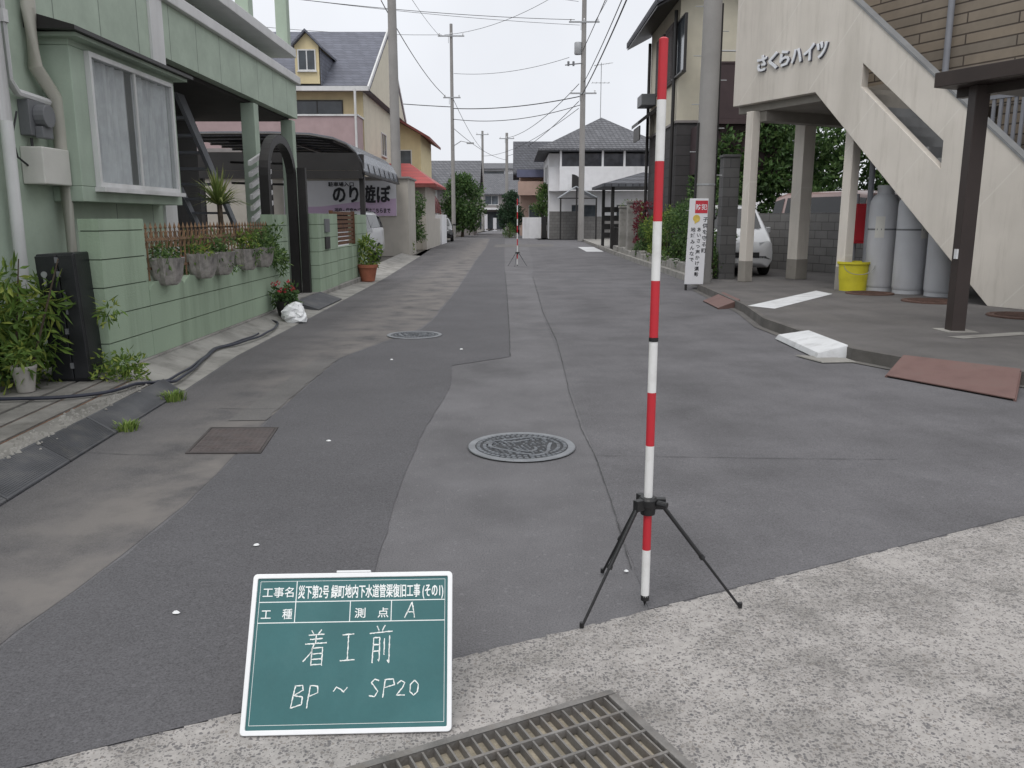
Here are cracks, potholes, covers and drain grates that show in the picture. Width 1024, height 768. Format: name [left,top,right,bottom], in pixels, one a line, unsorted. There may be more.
drain grate [345,689,696,768]
manhole cover [387,331,442,339]
utility cover [185,427,278,454]
manhole cover [468,432,576,462]
